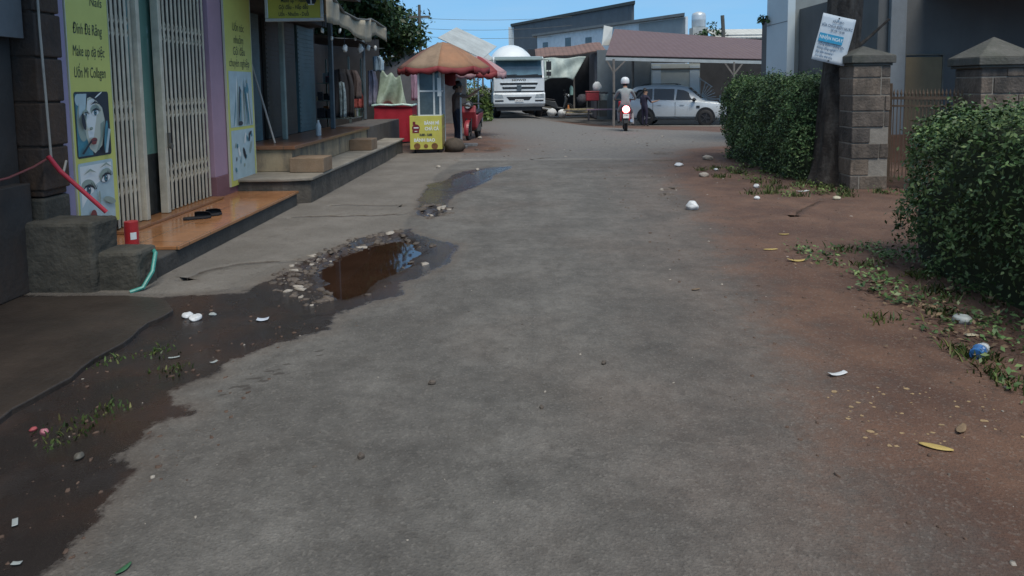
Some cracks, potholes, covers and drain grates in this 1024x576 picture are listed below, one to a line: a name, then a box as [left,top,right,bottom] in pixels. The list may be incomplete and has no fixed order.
pothole [244,228,456,316]
pothole [437,165,521,190]
crack [173,256,321,281]
